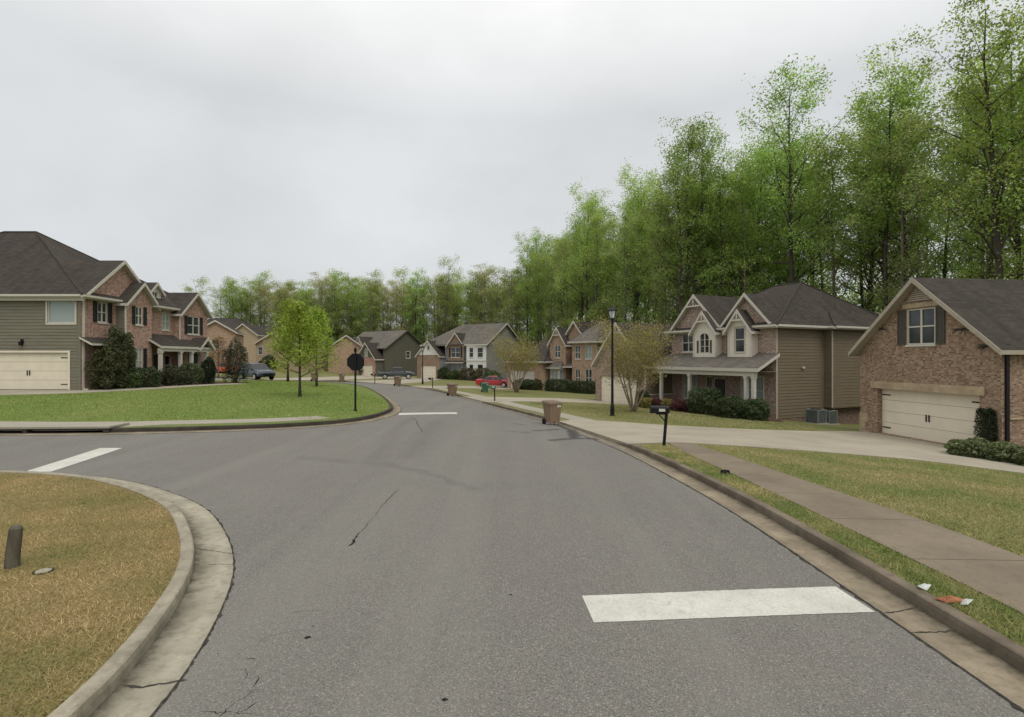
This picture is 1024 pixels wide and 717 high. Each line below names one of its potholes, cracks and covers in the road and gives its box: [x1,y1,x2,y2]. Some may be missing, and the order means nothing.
crack [123,679,188,688]
crack [349,492,395,546]
crack [201,610,319,717]
